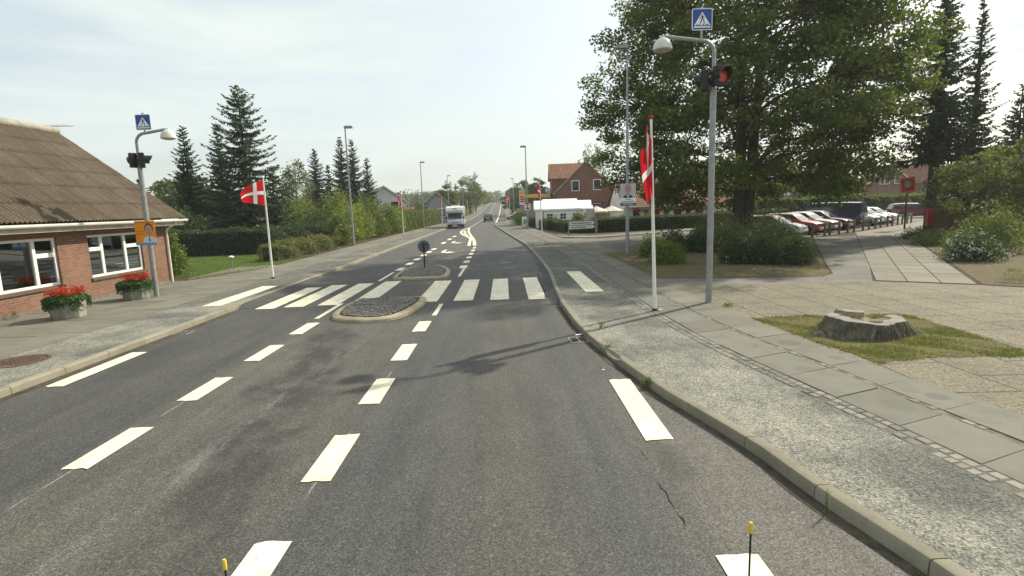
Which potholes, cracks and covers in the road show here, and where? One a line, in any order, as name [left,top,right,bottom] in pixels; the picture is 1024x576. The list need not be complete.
manhole cover [0,354,52,368]
crack [640,449,705,526]
